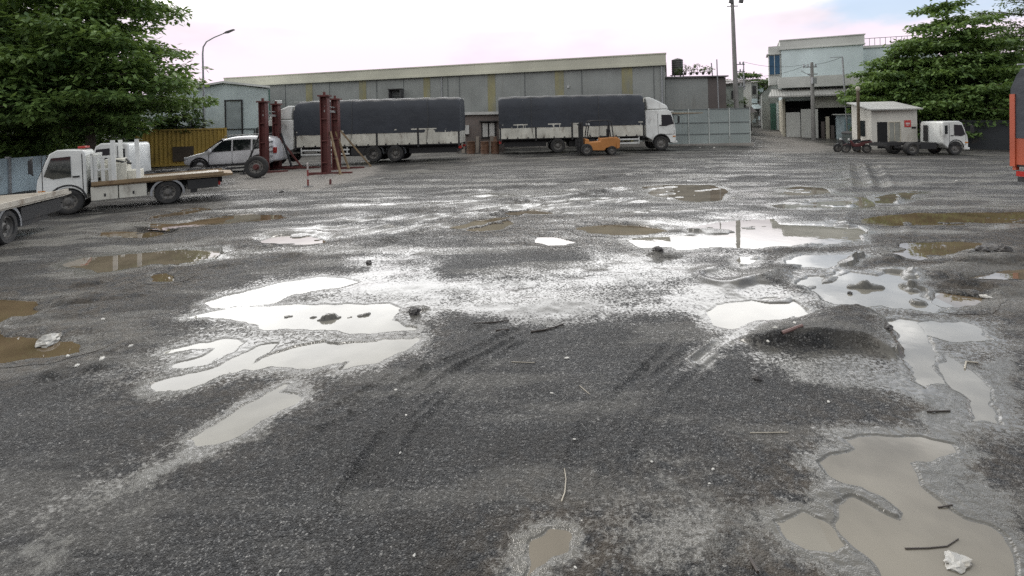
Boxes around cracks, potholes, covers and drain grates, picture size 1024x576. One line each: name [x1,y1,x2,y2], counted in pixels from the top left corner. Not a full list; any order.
pothole [0,315,113,368]
pothole [844,208,1024,227]
pothole [0,291,63,322]
